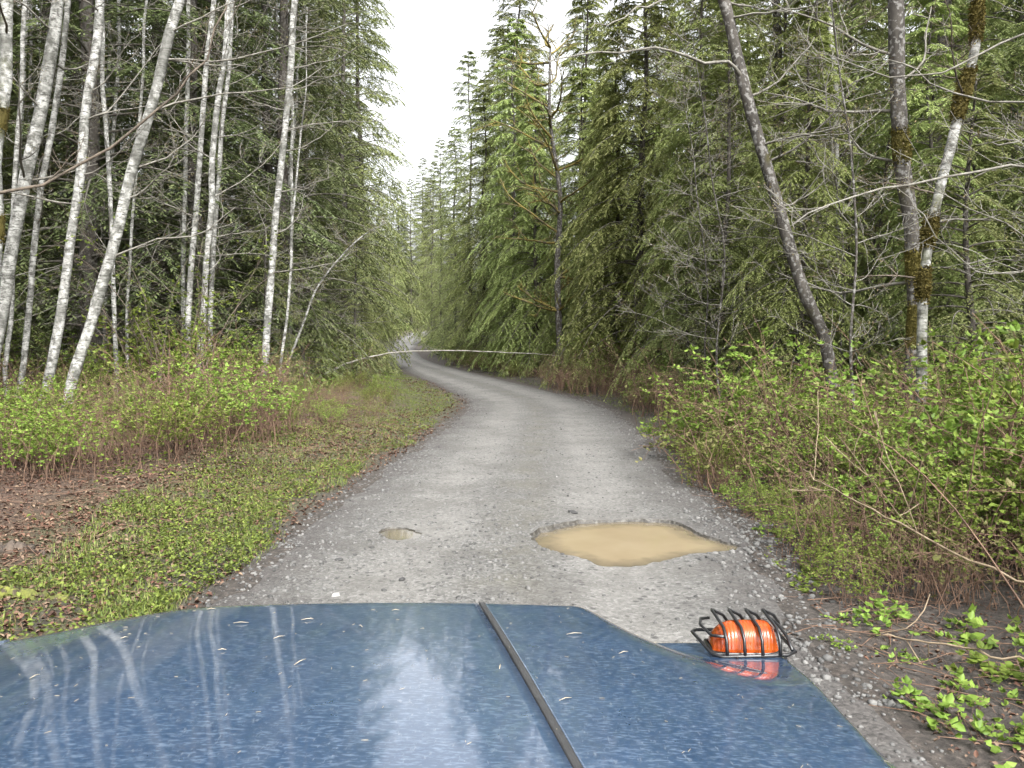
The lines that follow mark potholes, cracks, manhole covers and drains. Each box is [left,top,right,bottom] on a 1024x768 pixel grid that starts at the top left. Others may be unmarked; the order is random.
pothole [530,518,742,567]
pothole [379,527,423,540]
